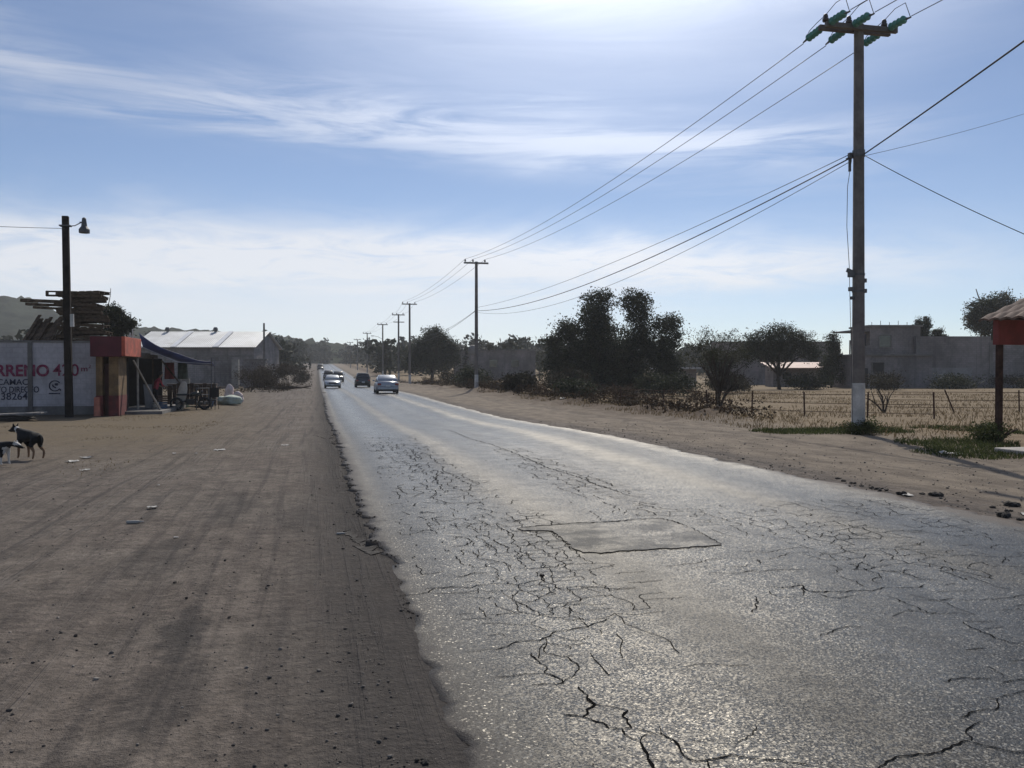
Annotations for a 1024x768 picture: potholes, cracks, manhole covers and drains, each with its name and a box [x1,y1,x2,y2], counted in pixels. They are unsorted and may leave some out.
crack [307,432,1024,768]
